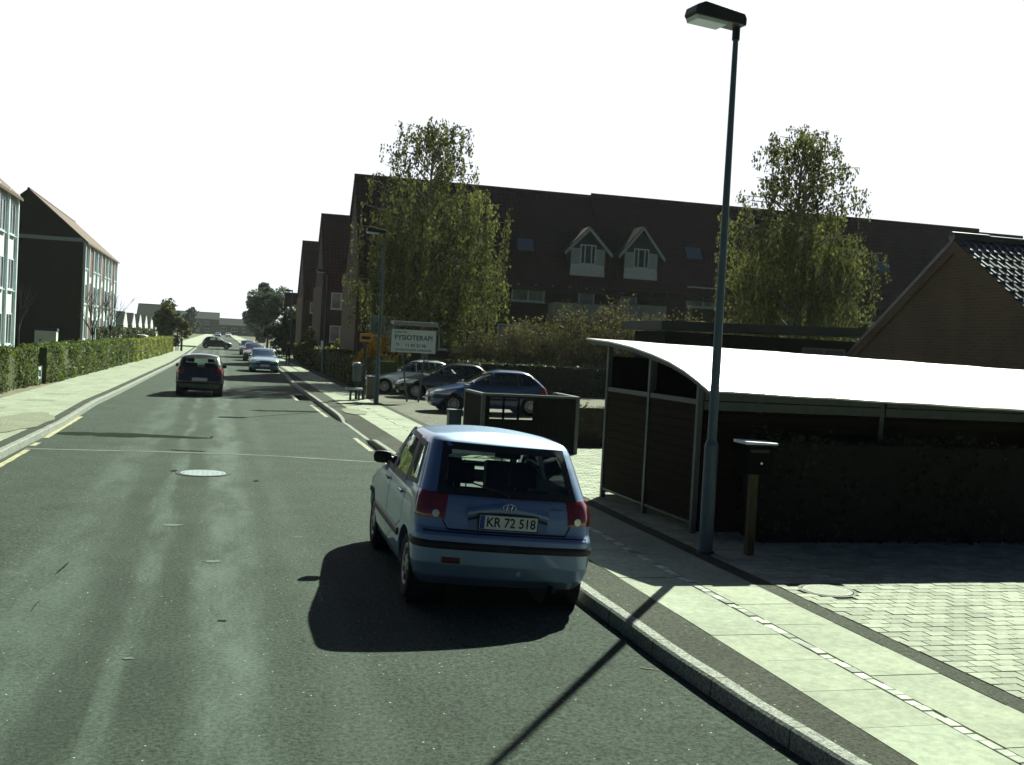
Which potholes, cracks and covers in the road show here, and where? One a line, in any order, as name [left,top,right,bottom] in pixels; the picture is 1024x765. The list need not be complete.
manhole cover [798,584,858,599]
manhole cover [175,469,231,477]
